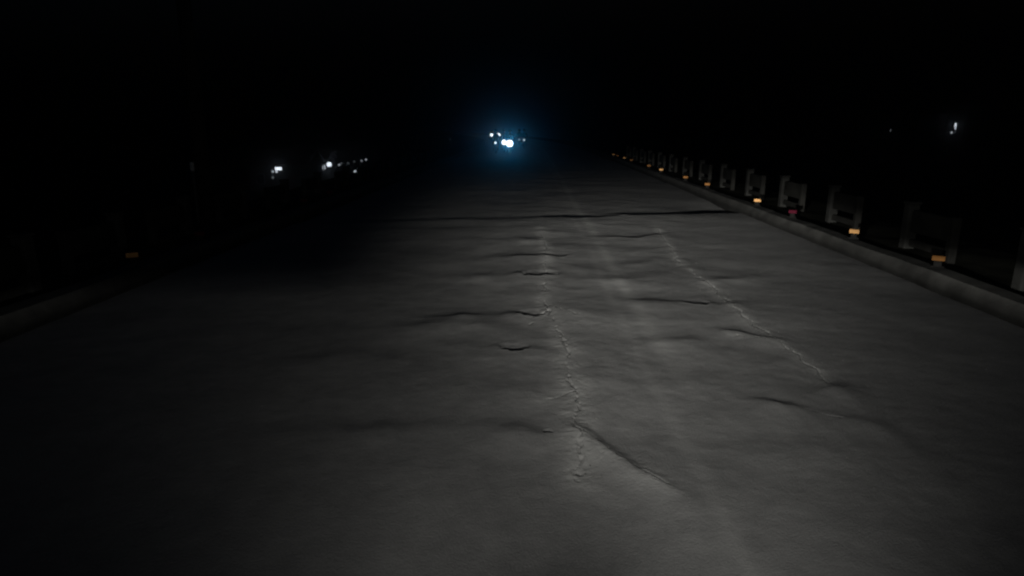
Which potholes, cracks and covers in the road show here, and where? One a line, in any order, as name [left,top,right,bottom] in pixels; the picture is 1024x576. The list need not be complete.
crack [527,214,831,487]
